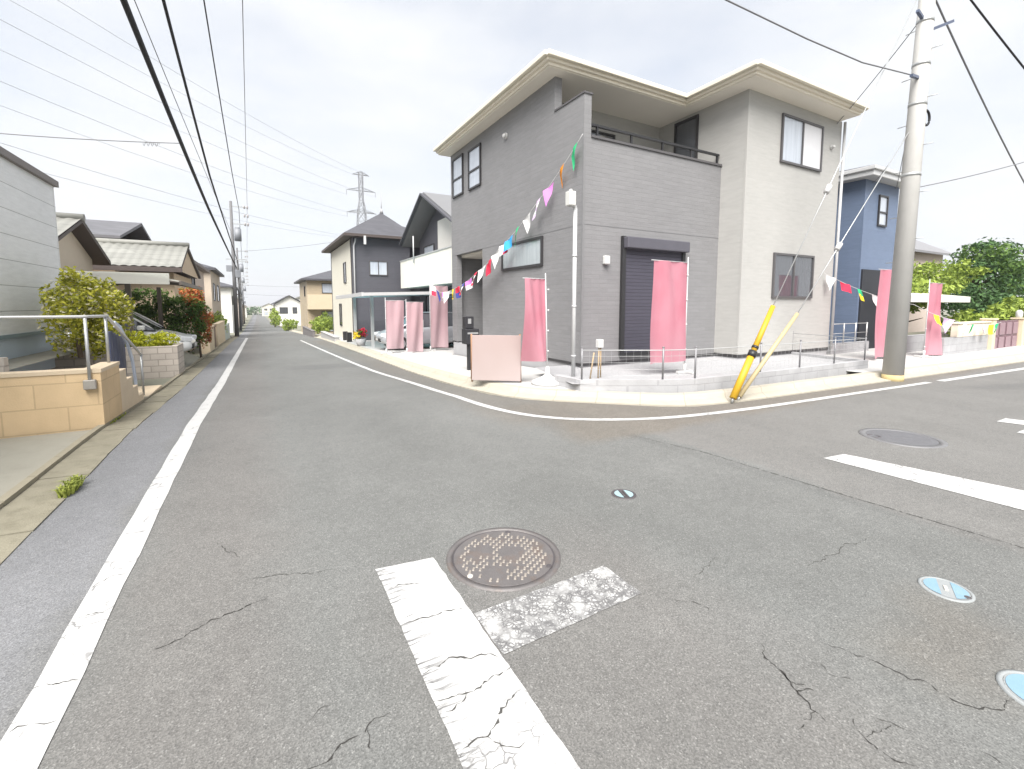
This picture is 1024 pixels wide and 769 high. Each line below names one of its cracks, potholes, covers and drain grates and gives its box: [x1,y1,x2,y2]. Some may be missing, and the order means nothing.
utility cover [611,489,636,500]
utility cover [996,669,1024,706]
utility cover [918,576,976,603]
crack [308,712,390,769]
manhole cover [446,527,561,592]
manhole cover [858,428,948,448]
crack [156,572,317,649]
crack [853,718,915,766]
crack [762,646,1014,730]
crack [423,653,525,756]
